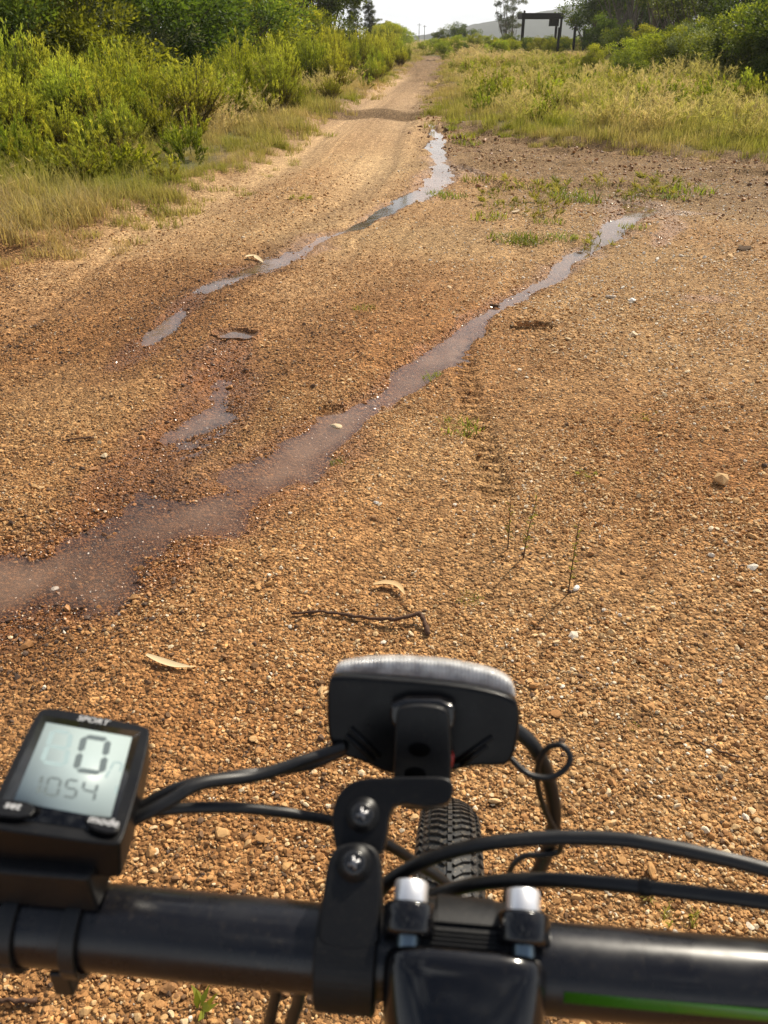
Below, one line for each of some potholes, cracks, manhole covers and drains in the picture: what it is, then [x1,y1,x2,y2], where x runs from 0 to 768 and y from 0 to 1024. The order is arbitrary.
pothole [211,327,260,341]
pothole [510,320,558,331]
